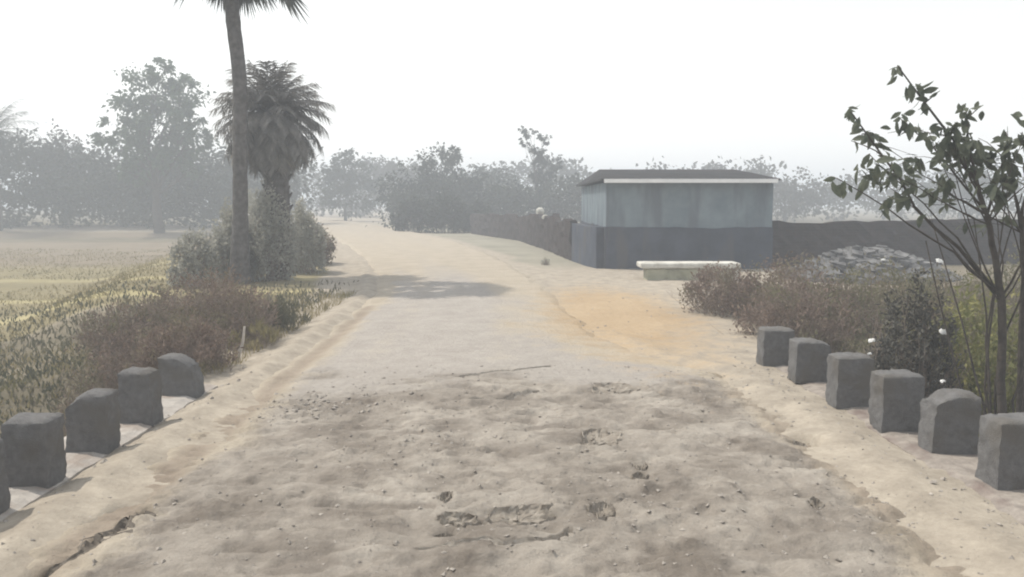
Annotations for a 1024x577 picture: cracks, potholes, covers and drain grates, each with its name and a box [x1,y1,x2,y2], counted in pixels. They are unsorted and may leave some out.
pothole [435,511,482,528]
crack [44,510,156,577]
crack [418,528,569,550]
pothole [582,428,623,447]
pothole [631,471,649,479]
pothole [587,501,615,521]
crack [459,365,551,400]
pothole [591,382,641,394]
pothole [483,503,556,526]
pothole [439,491,451,503]
